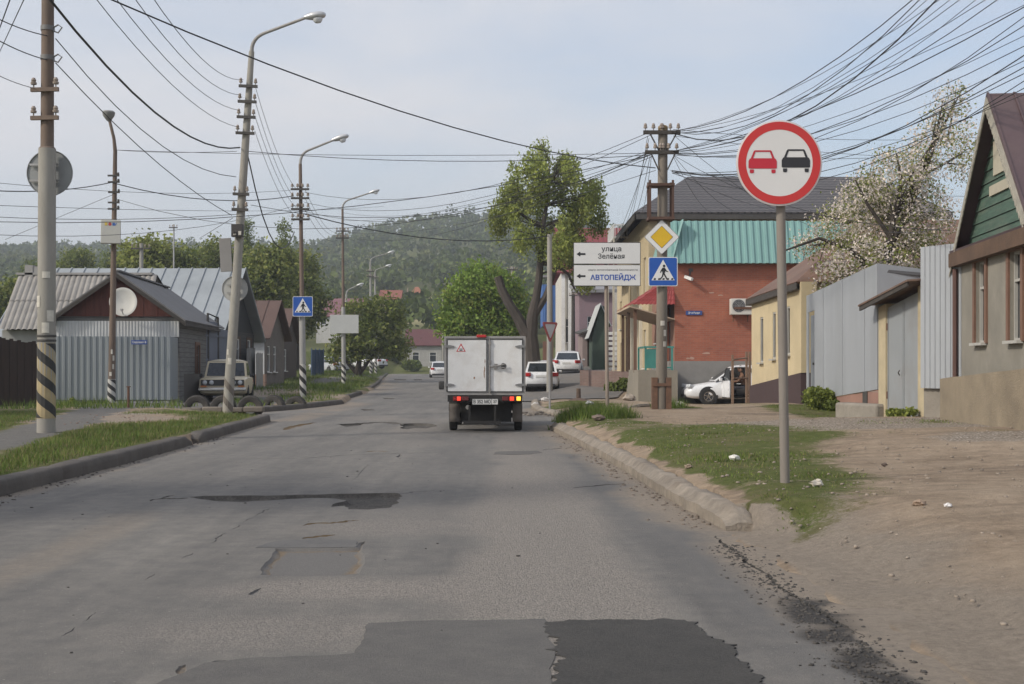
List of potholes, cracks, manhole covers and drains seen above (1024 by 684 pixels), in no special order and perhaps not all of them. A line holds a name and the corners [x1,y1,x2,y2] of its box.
pothole [260,541,365,576]
pothole [192,493,402,510]
crack [302,520,356,539]
